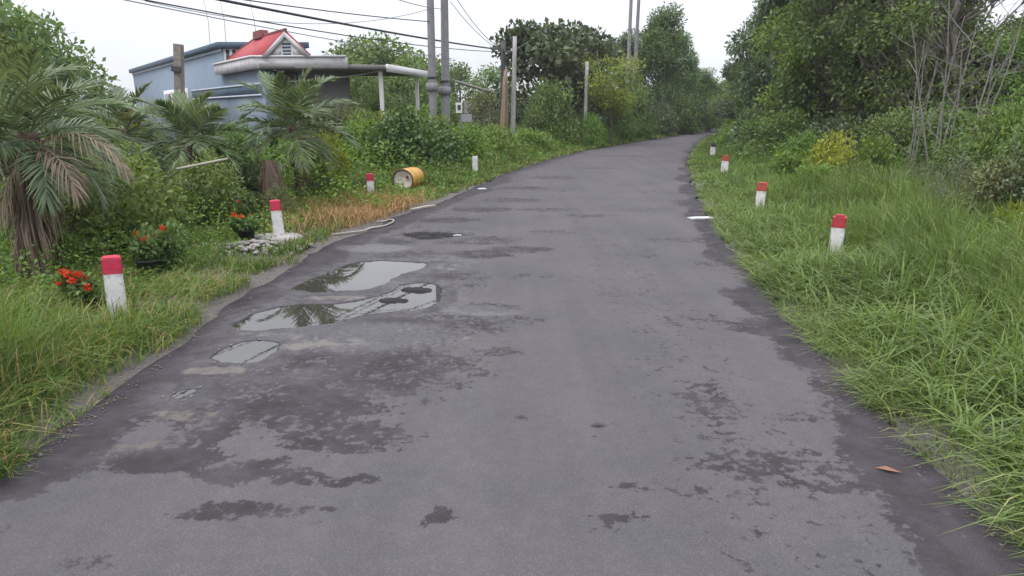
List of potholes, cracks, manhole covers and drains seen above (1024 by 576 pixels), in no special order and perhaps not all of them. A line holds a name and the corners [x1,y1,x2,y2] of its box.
pothole [398,231,468,240]
pothole [210,339,283,365]
pothole [232,280,454,332]
pothole [288,258,431,293]
